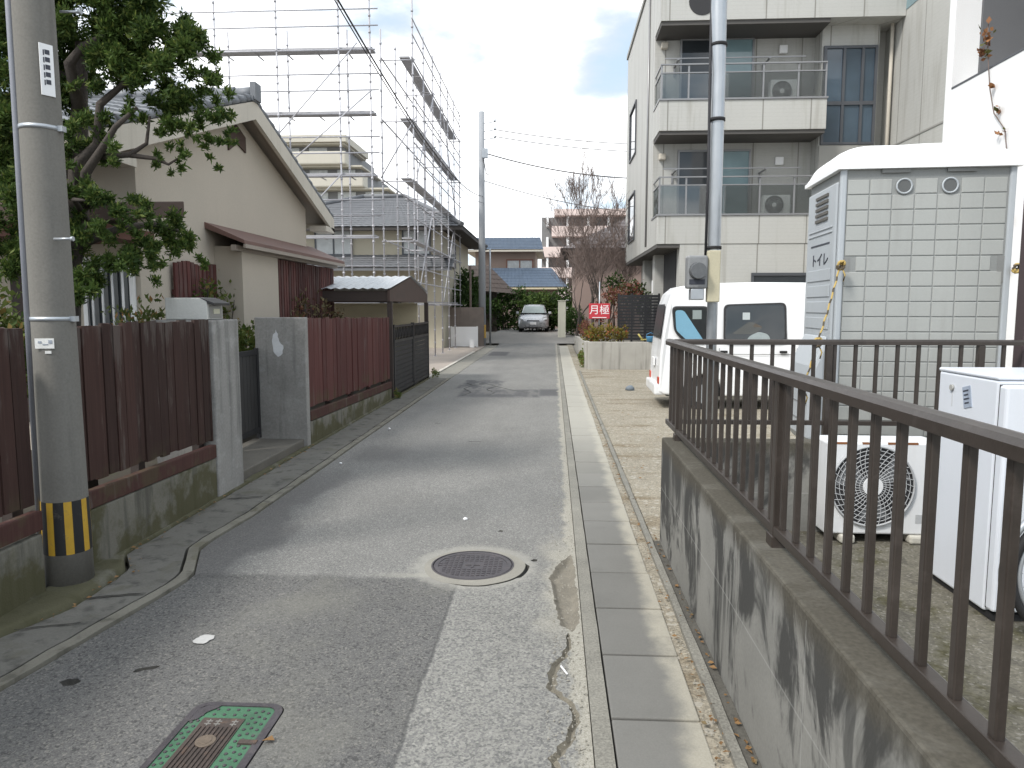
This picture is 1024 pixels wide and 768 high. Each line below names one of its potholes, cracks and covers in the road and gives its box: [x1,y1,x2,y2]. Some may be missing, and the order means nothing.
manhole cover [424,549,525,586]
pothole [548,555,580,632]
manhole cover [140,702,283,768]
